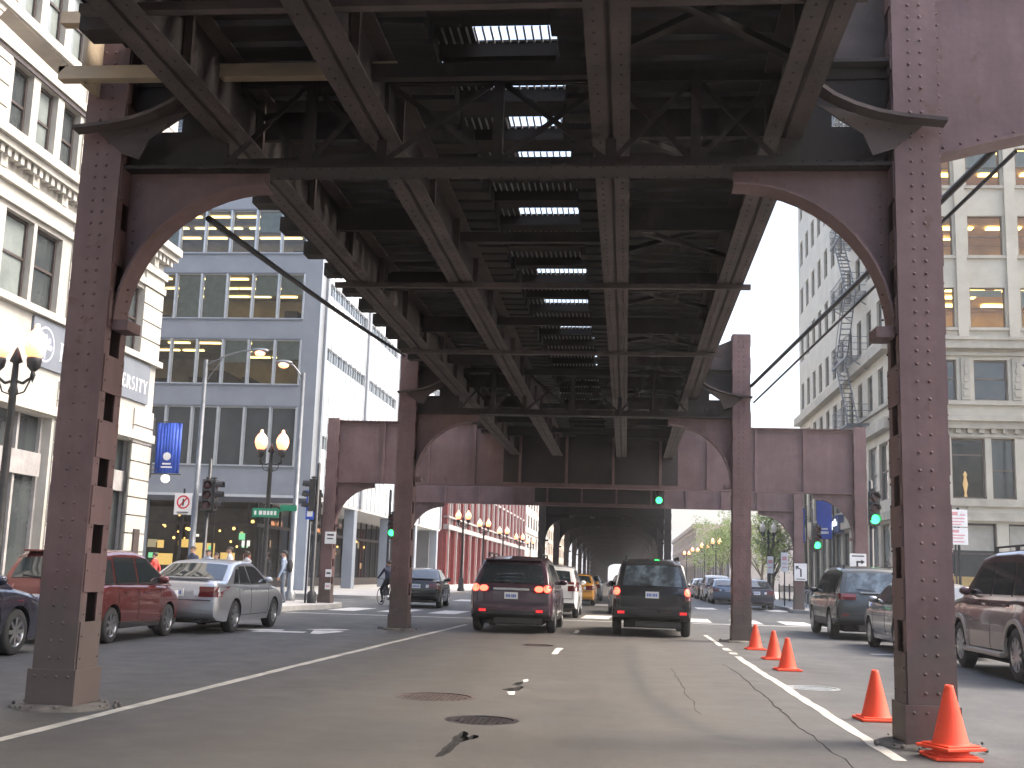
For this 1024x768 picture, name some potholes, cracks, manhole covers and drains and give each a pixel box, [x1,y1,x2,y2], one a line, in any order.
crack [726,666,853,768]
pothole [435,731,479,757]
manhole cover [445,715,519,725]
manhole cover [395,692,476,701]
